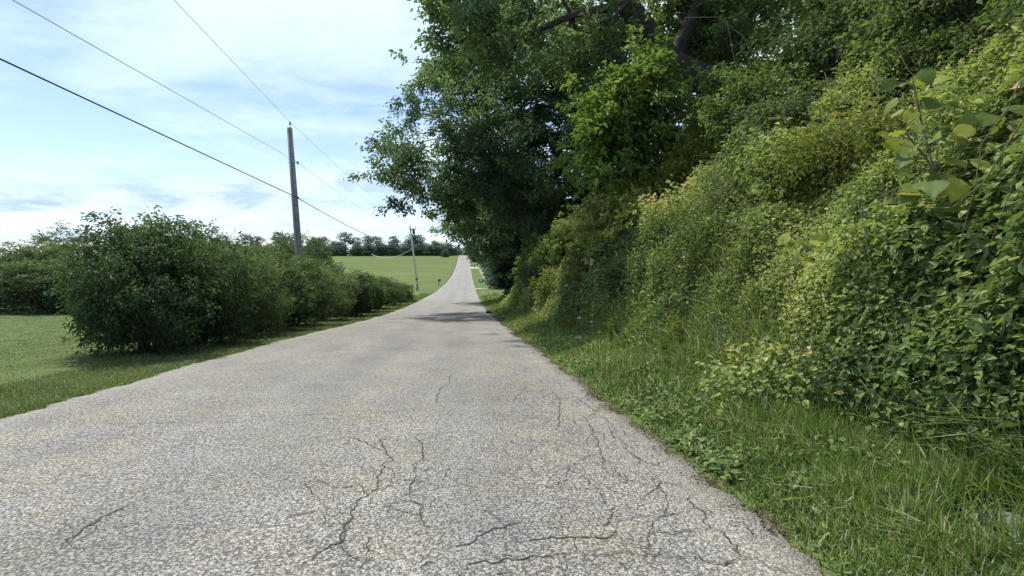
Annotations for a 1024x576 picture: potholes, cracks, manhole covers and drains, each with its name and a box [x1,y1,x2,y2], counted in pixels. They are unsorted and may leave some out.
crack [486,363,794,573]
crack [419,499,638,576]
crack [59,503,139,550]
crack [285,431,456,573]
